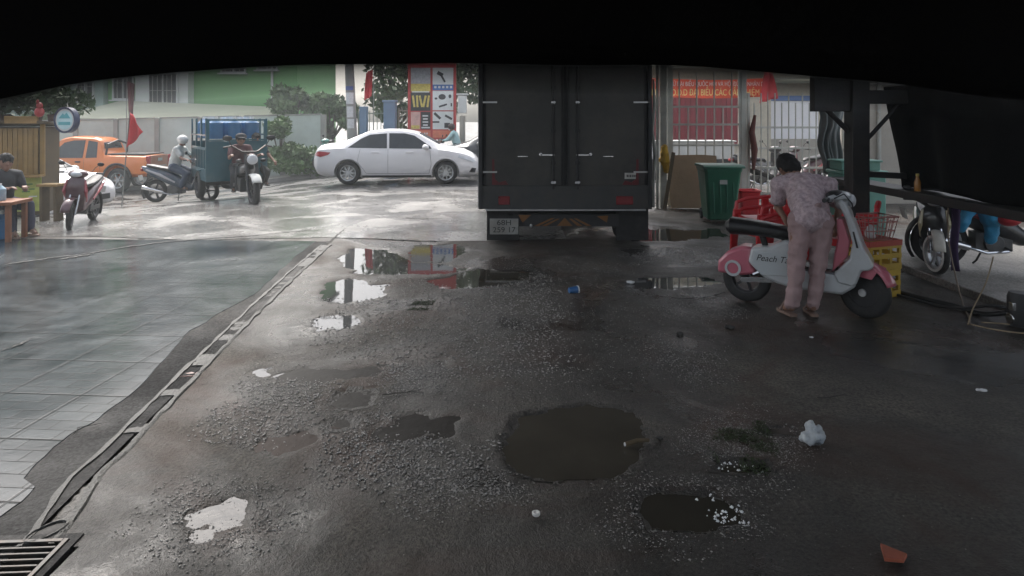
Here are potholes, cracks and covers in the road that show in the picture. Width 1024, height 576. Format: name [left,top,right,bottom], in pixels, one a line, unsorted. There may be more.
pothole [498,401,649,484]
pothole [633,486,748,534]
pothole [707,457,779,478]
drain grate [0,533,84,576]
pothole [325,386,382,412]
